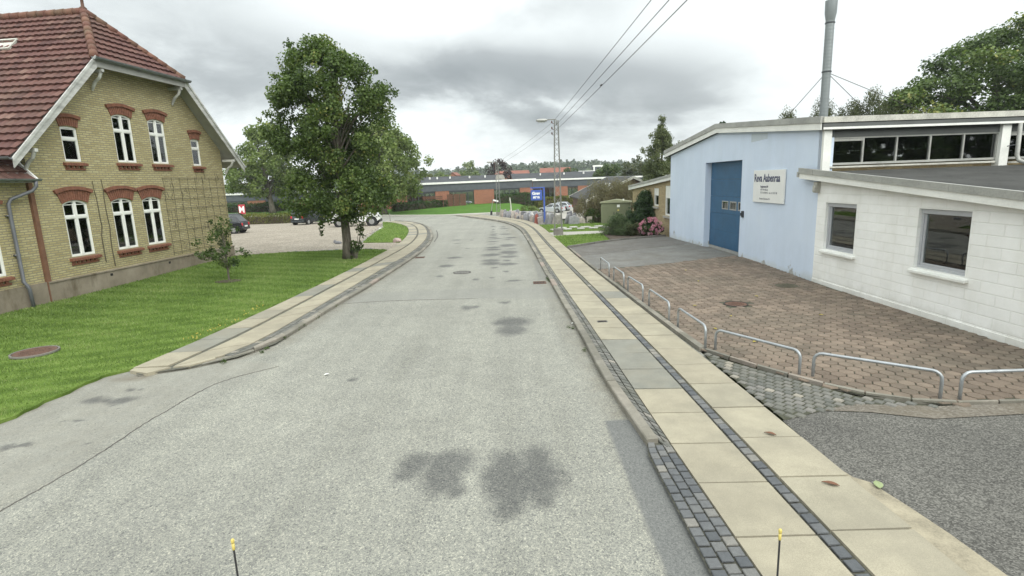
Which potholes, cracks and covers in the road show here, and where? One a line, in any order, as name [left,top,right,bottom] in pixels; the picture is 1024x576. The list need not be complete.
crack [0,366,278,512]
manhole cover [8,345,61,359]
